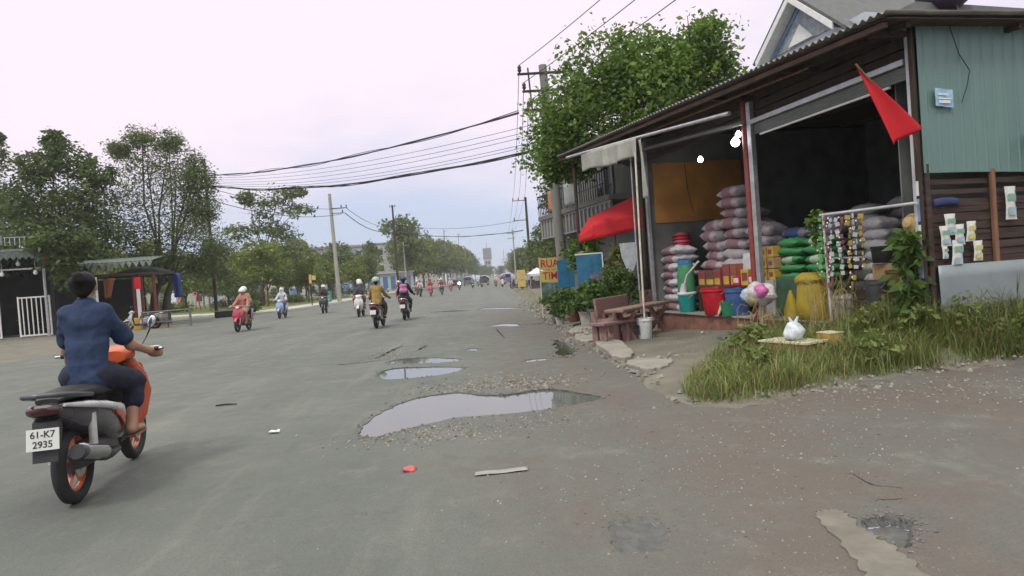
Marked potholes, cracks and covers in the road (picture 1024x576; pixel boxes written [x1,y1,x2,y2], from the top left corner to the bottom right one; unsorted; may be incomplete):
pothole [852,510,939,553]
pothole [373,365,470,380]
pothole [357,387,611,440]
crack [342,345,427,365]
pothole [546,338,580,358]
pothole [387,356,462,365]
crack [845,472,906,506]
